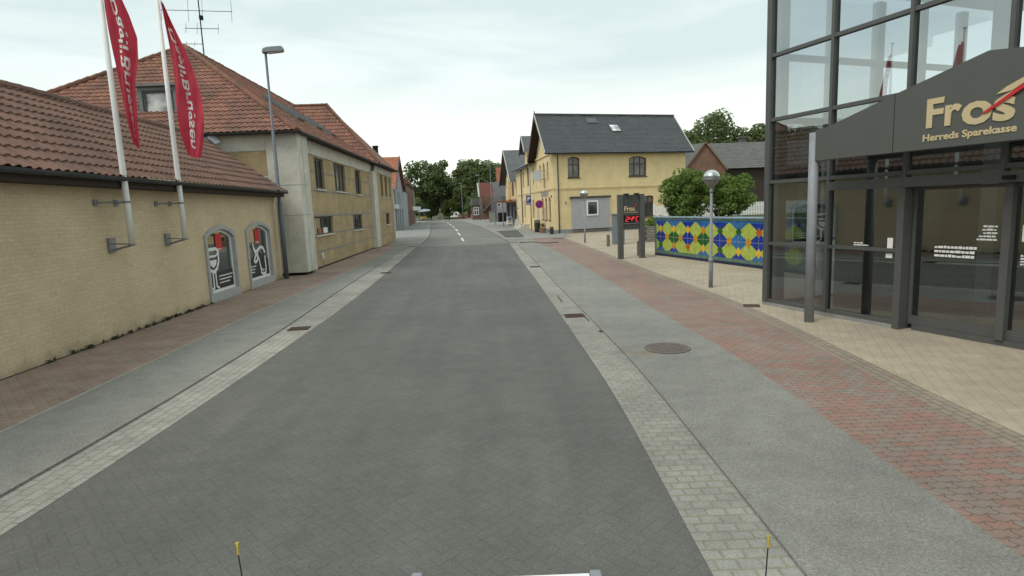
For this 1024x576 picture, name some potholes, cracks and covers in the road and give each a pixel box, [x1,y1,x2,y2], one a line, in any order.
manhole cover [644,342,691,354]
